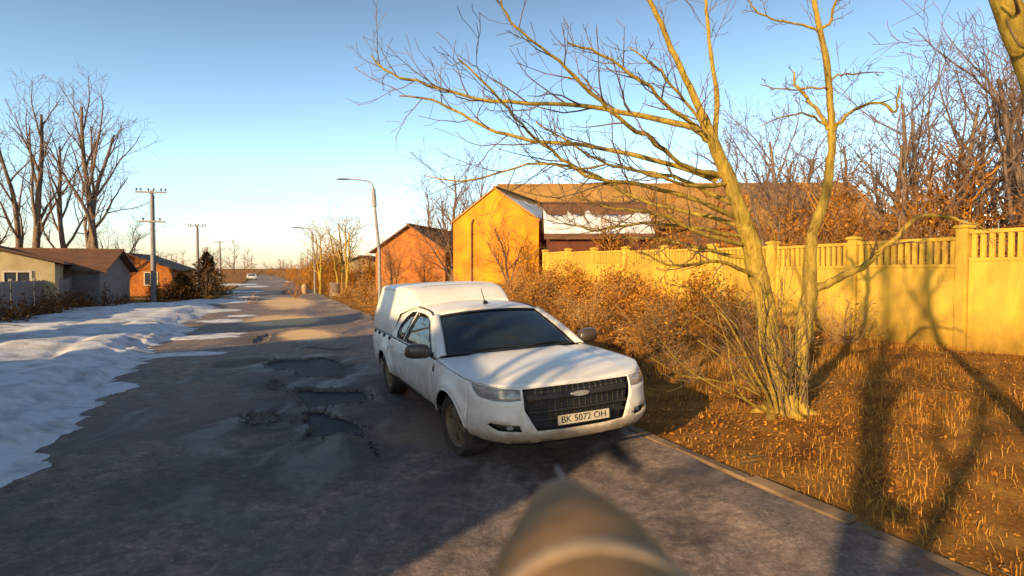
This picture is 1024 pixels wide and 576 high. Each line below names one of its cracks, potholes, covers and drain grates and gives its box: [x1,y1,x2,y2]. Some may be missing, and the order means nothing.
pothole [290,408,372,441]
crack [367,441,380,458]
pothole [286,385,378,409]
pothole [263,356,352,379]
pothole [250,333,274,343]
pothole [237,410,287,426]
